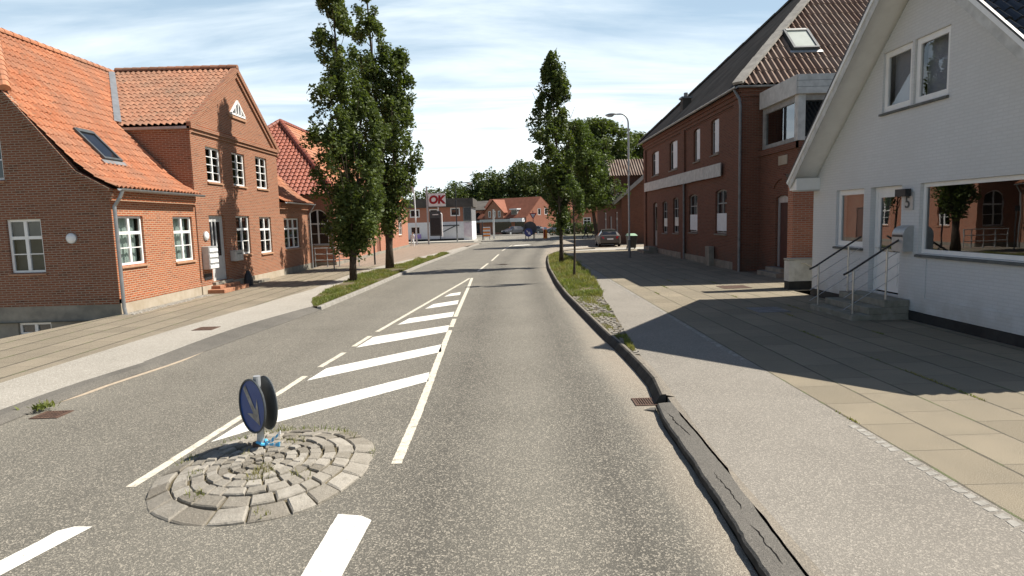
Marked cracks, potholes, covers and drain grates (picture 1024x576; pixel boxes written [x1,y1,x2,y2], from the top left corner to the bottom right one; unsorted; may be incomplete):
drain grate [28,410,74,419]
drain grate [631,397,657,407]
